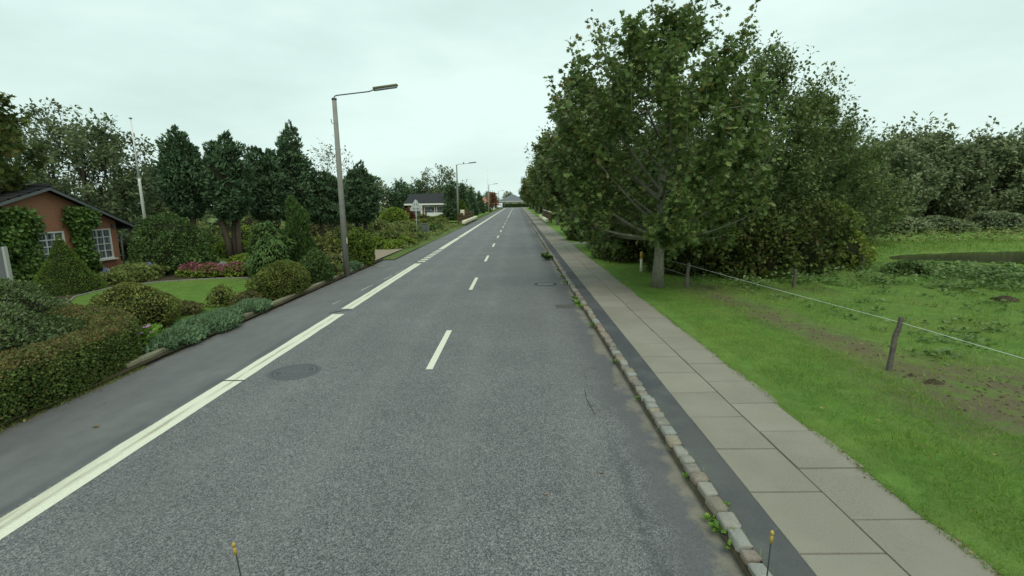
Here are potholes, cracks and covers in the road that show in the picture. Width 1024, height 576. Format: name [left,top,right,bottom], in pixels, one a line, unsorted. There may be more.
manhole cover [267,363,322,380]
